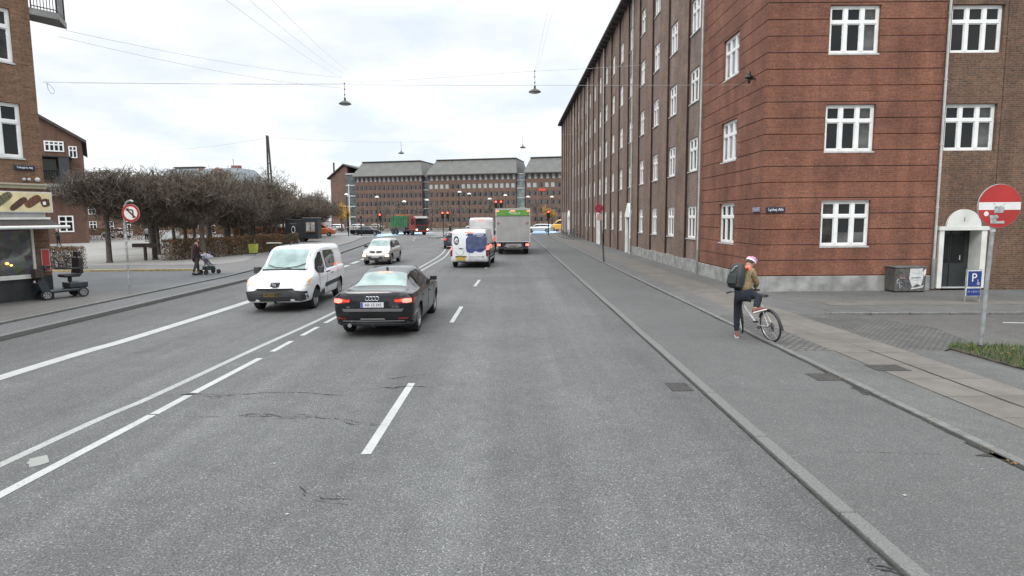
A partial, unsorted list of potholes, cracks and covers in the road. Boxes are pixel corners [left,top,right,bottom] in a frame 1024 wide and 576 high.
drain grate [665,383,694,391]
crack [300,486,348,505]
crack [829,551,900,575]
crack [111,392,351,400]
crack [158,414,381,425]
drain grate [805,373,842,381]
